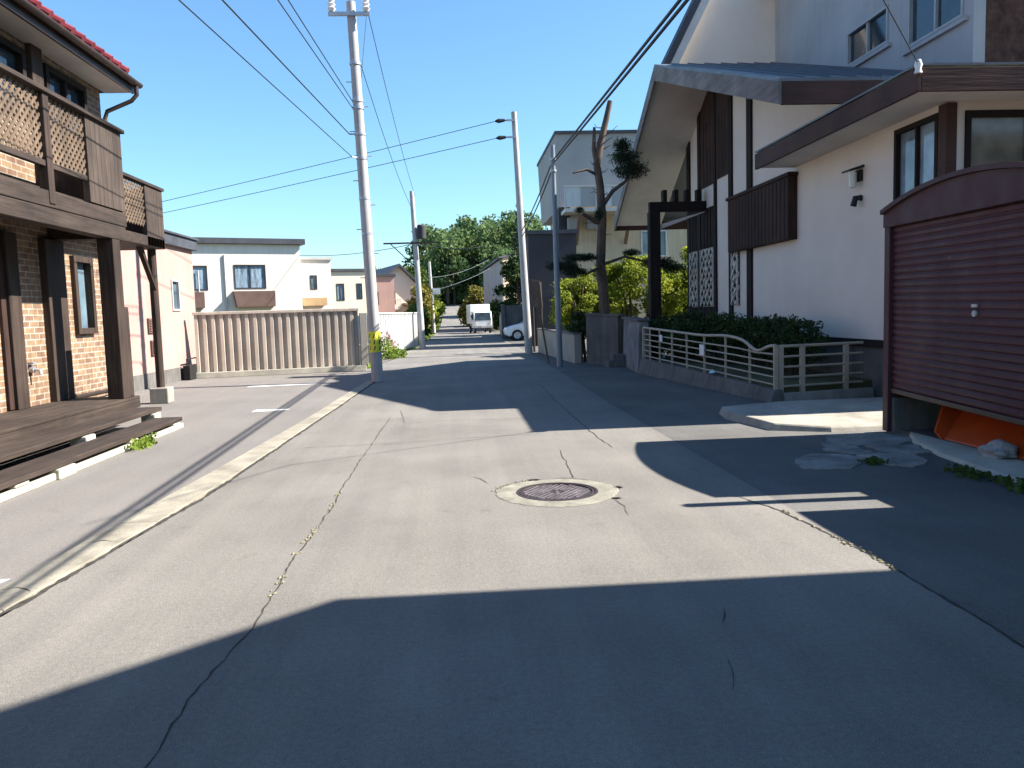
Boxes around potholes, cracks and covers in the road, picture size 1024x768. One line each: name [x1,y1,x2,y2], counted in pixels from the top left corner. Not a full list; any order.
manhole cover [495,479,619,507]
crack [144,411,539,768]
